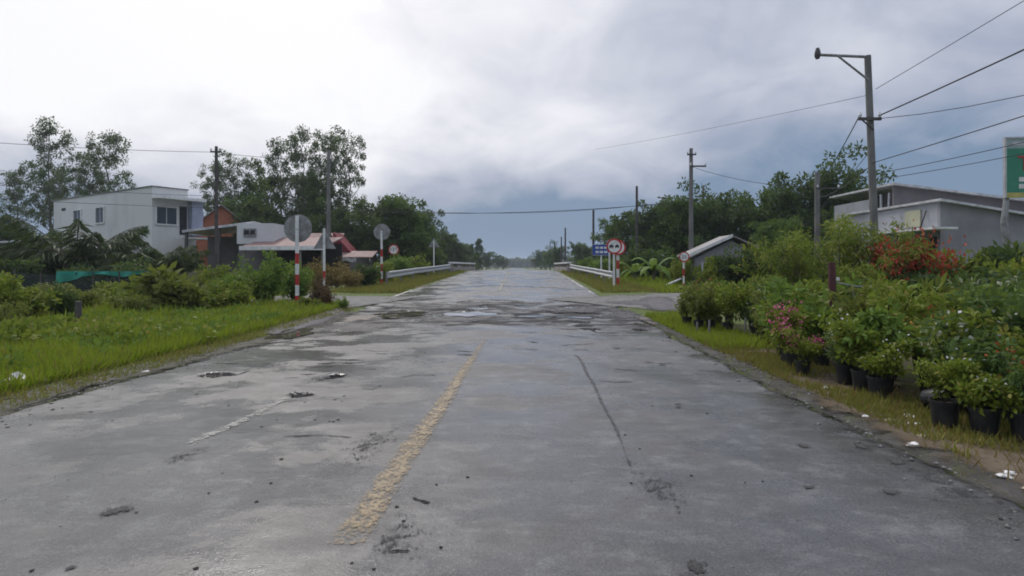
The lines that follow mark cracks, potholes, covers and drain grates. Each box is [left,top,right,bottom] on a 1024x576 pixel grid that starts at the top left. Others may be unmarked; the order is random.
pothole [100,505,134,516]
pothole [373,309,430,319]
